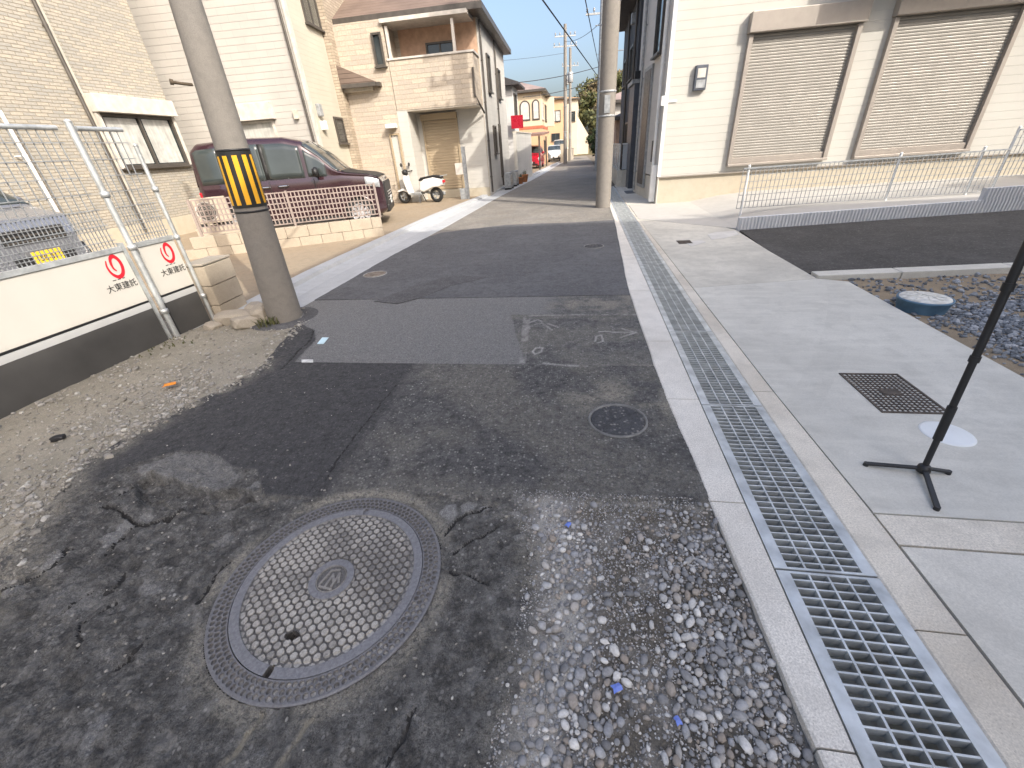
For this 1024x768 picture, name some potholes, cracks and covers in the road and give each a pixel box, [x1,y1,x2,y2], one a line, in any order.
drain grate [639,264,684,291]
manhole cover [204,498,442,710]
drain grate [631,245,666,265]
crack [115,638,148,672]
drain grate [669,332,762,406]
crack [195,562,231,605]
drain grate [775,570,1007,768]
drain grate [702,405,878,578]
drain grate [620,221,644,233]
crack [385,707,417,768]
drain grate [617,213,637,222]
crack [444,507,498,586]
